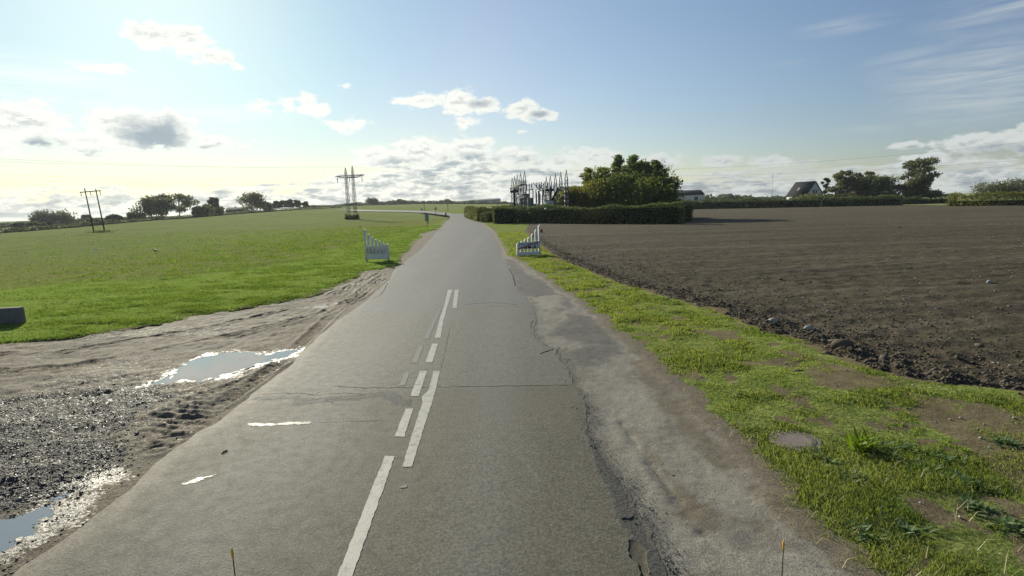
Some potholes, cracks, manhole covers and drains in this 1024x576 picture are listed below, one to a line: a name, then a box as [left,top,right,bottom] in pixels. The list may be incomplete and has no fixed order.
pothole [628,539,650,576]
manhole cover [768,430,823,452]
